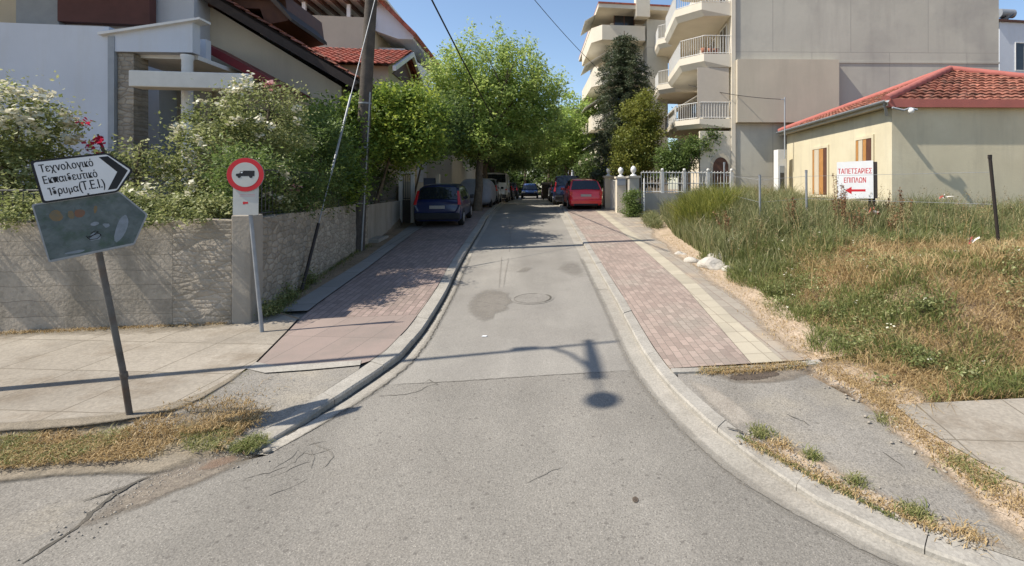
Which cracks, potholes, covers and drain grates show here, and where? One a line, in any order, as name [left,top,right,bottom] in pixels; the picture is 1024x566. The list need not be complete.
crack [245,439,334,495]
manhole cover [511,293,554,304]
crack [22,474,153,564]
